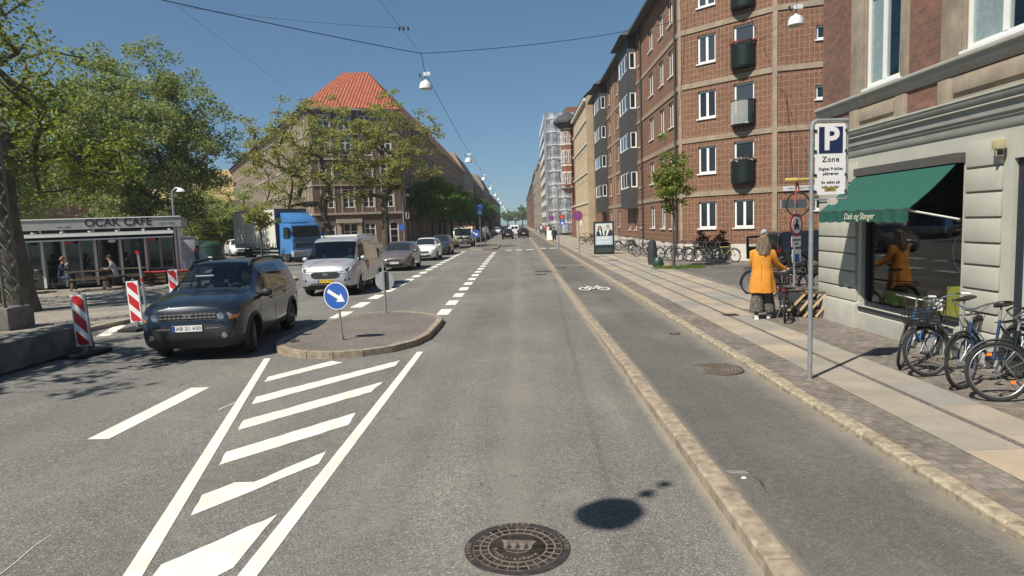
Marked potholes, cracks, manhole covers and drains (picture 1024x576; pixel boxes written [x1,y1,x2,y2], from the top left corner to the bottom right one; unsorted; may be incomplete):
manhole cover [465,523,571,576]
manhole cover [693,363,744,375]
